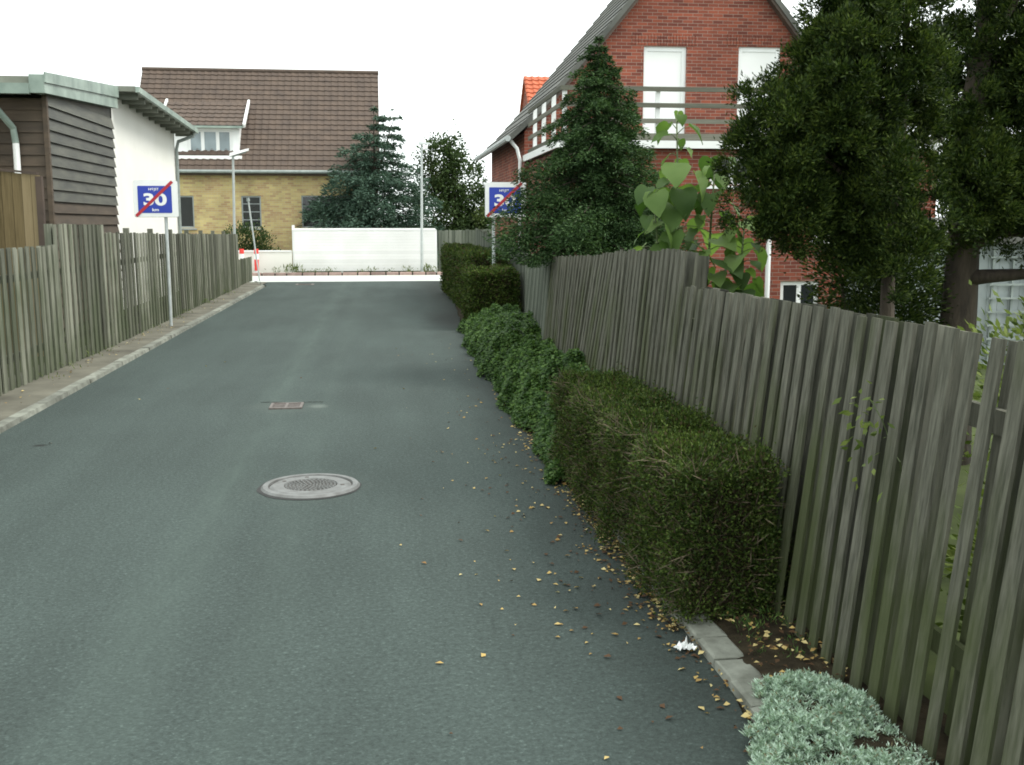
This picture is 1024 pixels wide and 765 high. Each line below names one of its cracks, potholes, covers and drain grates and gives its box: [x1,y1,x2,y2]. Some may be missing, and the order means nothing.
drain grate [269,402,304,410]
manhole cover [257,473,361,500]
